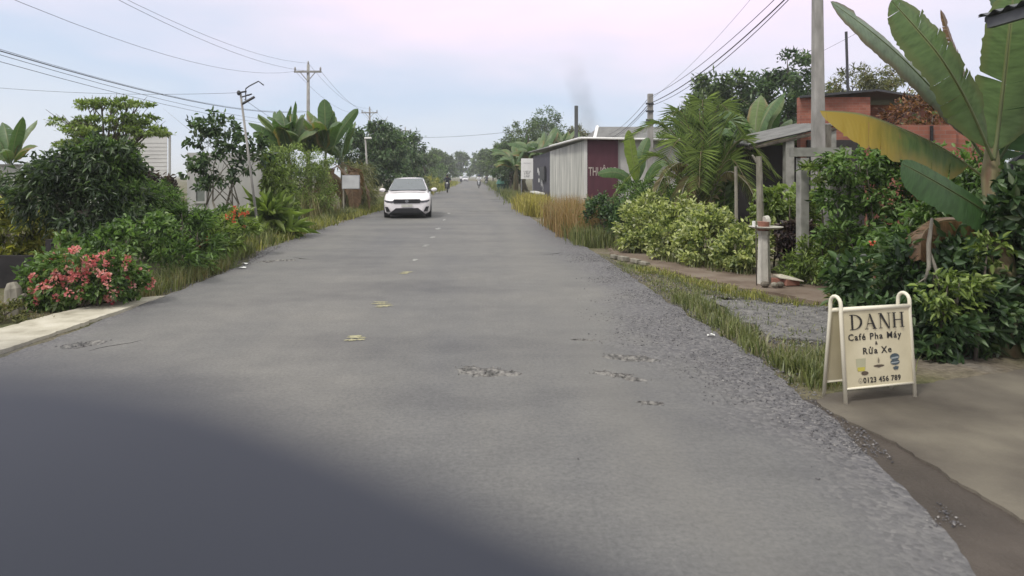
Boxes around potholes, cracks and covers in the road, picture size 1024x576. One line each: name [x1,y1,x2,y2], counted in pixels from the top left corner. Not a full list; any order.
pothole [602,353,659,362]
pothole [55,340,107,349]
pothole [455,365,522,378]
pothole [589,369,648,383]
